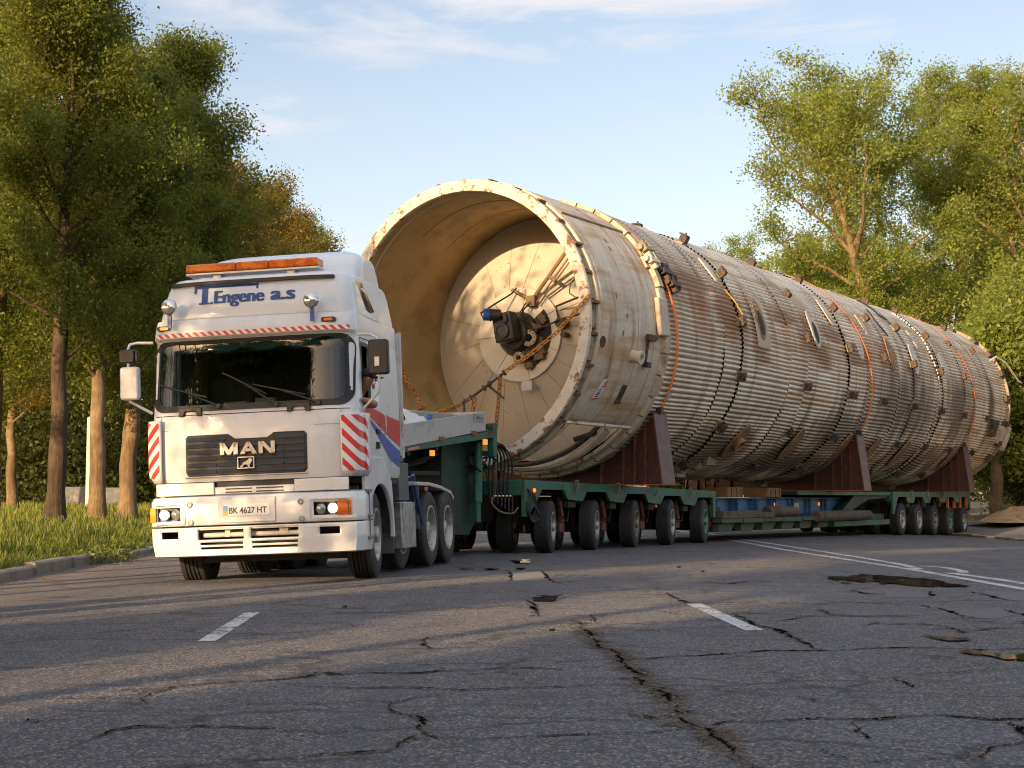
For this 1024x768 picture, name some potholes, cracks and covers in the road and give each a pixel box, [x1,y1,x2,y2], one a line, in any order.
pothole [531,594,563,602]
crack [0,571,1024,768]
